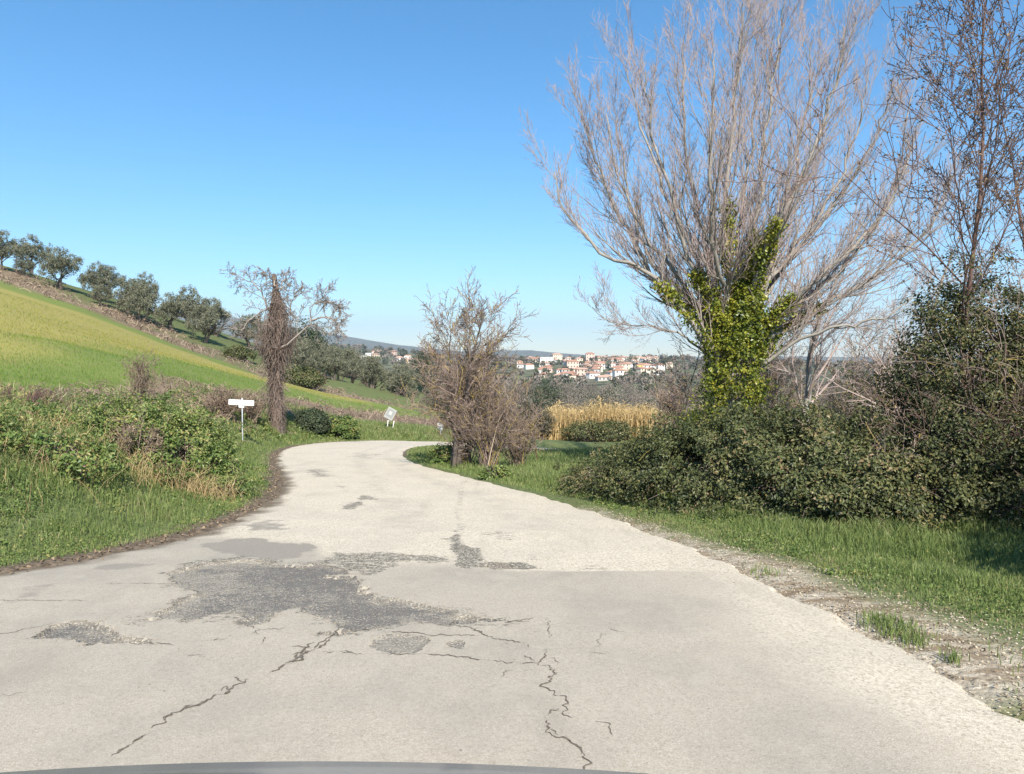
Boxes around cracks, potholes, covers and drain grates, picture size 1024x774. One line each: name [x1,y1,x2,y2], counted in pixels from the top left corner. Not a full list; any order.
crack [111,618,613,769]
pothole [154,560,498,636]
pothole [447,640,465,649]
pothole [369,633,431,654]
pothole [31,620,153,646]
